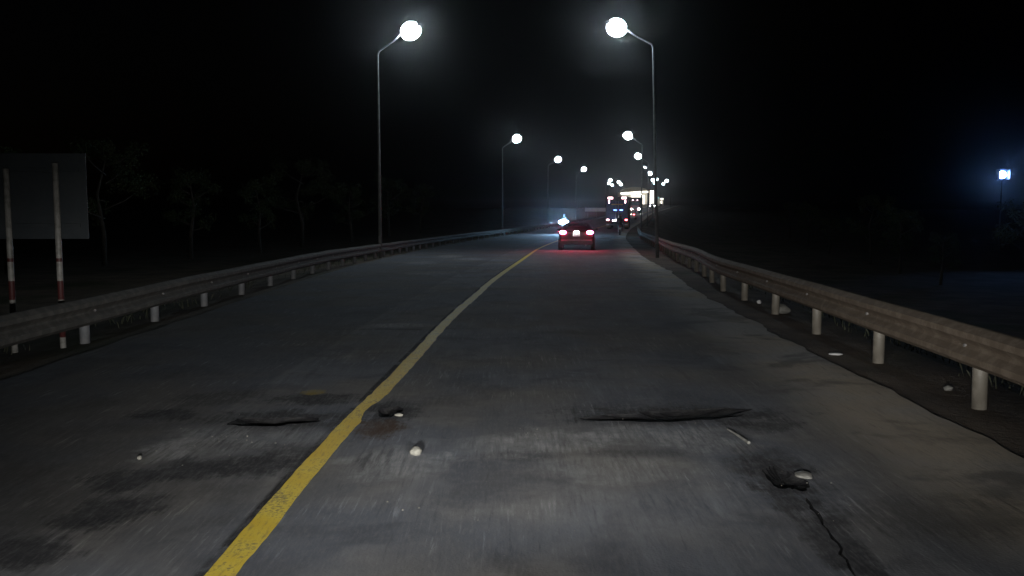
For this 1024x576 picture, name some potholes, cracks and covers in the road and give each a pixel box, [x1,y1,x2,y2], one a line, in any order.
pothole [762,465,810,491]
pothole [378,406,404,417]
pothole [227,417,320,427]
crack [805,498,856,576]
pothole [580,407,752,422]
